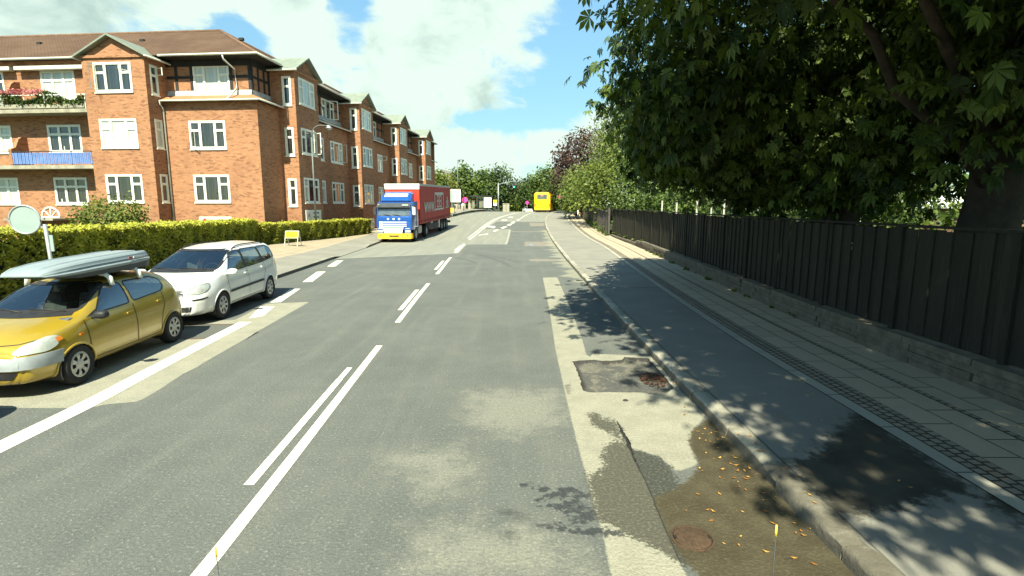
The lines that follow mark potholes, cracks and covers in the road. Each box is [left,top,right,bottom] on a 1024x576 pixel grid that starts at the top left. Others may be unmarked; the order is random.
manhole cover [670,525,715,552]
crack [617,422,682,566]
